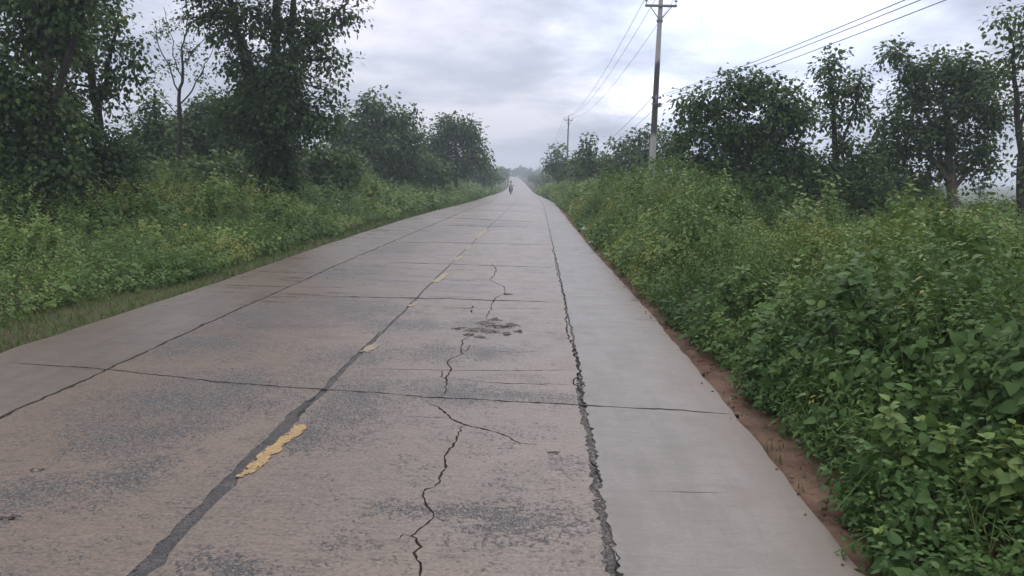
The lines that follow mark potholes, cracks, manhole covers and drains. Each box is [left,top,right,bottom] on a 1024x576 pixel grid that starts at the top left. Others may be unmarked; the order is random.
pothole [451,317,522,339]
crack [399,249,587,576]
